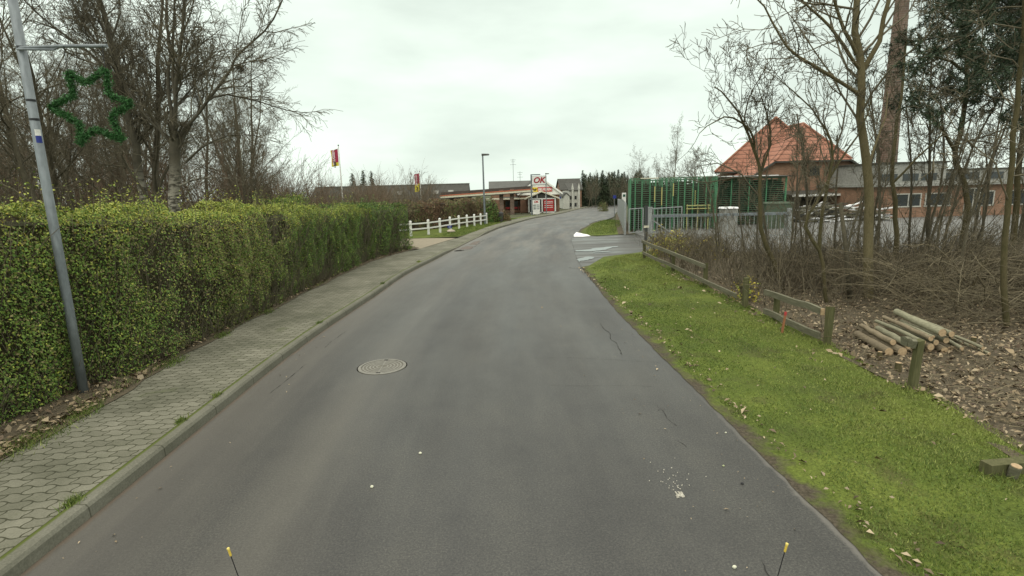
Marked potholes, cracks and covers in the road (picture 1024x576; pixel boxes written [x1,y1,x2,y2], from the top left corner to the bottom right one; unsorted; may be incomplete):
manhole cover [357,359,407,375]
